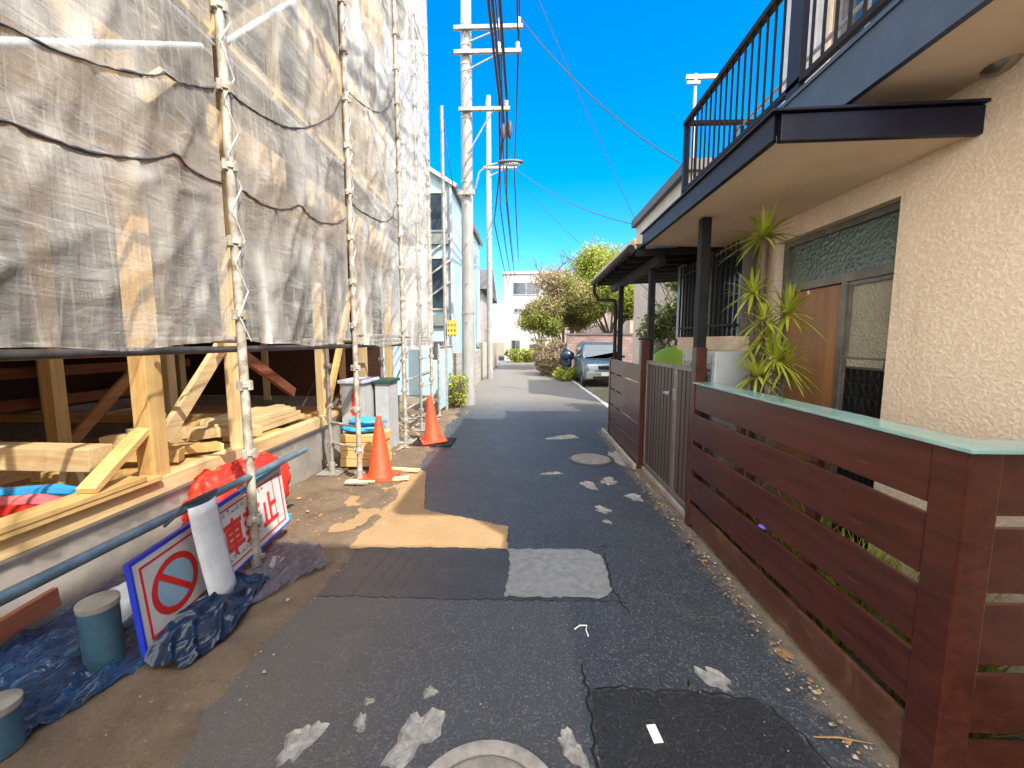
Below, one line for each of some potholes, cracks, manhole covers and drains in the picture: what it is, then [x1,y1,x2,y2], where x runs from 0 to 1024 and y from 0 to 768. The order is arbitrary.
manhole cover [428,740,548,768]
crack [317,546,630,614]
manhole cover [567,452,615,466]
crack [581,661,832,768]
